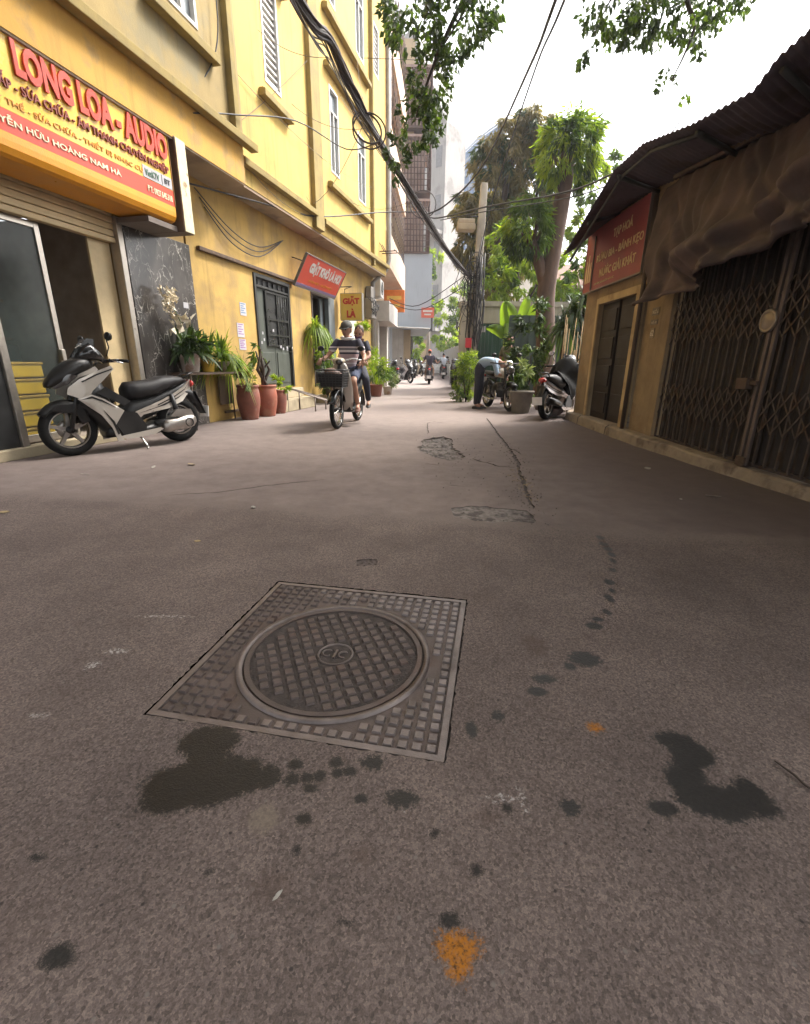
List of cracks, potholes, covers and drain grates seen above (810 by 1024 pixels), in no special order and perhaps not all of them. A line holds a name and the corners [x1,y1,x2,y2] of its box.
crack [167,479,323,496]
pothole [417,436,465,461]
pothole [451,506,536,523]
manhole cover [147,582,467,763]
crack [474,418,535,509]
